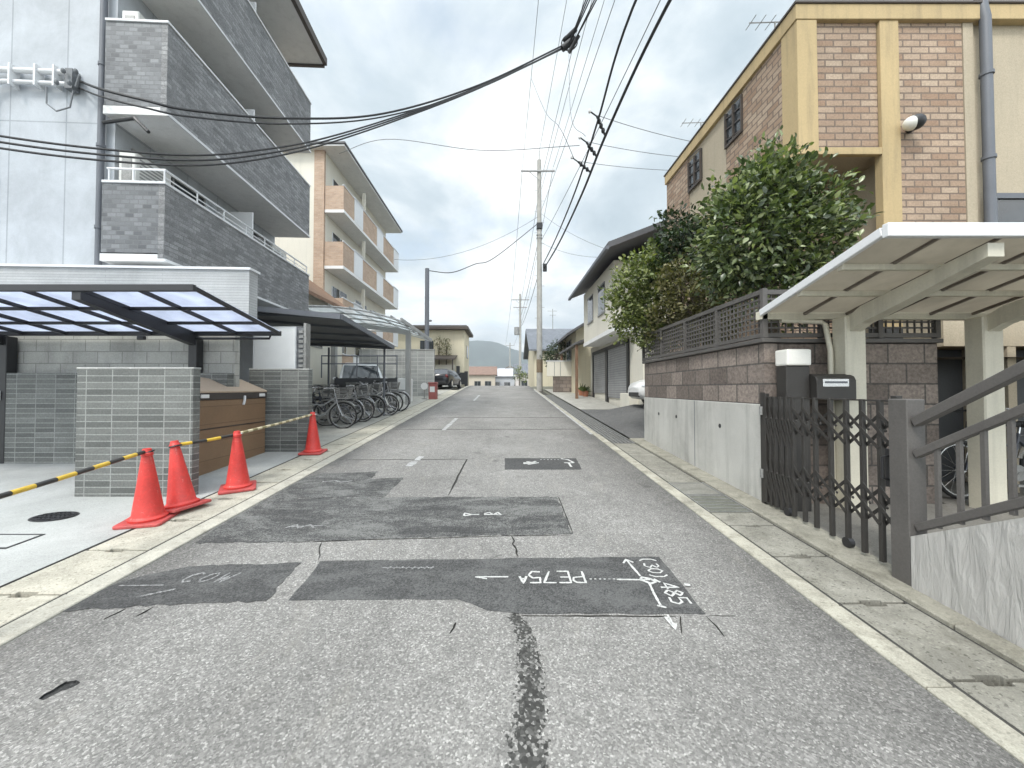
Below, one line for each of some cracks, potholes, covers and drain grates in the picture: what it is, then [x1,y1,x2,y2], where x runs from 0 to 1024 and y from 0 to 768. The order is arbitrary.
manhole cover [28,511,80,522]
manhole cover [0,534,46,549]
drain grate [544,395,635,444]
crack [382,459,467,495]
